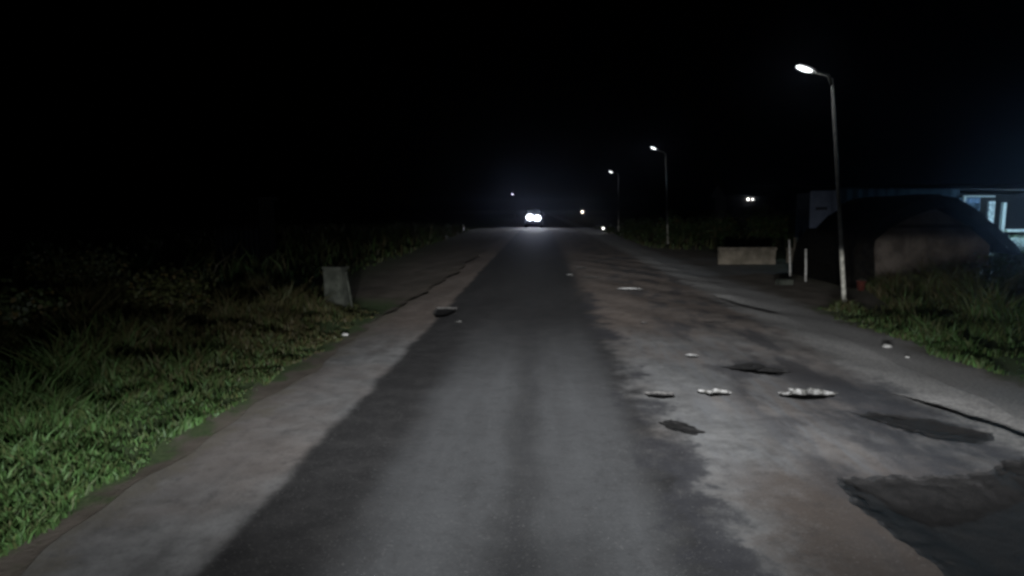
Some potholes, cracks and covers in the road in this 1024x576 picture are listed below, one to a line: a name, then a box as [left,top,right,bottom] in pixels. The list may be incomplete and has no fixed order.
pothole [721,362,791,376]
pothole [658,419,706,435]
